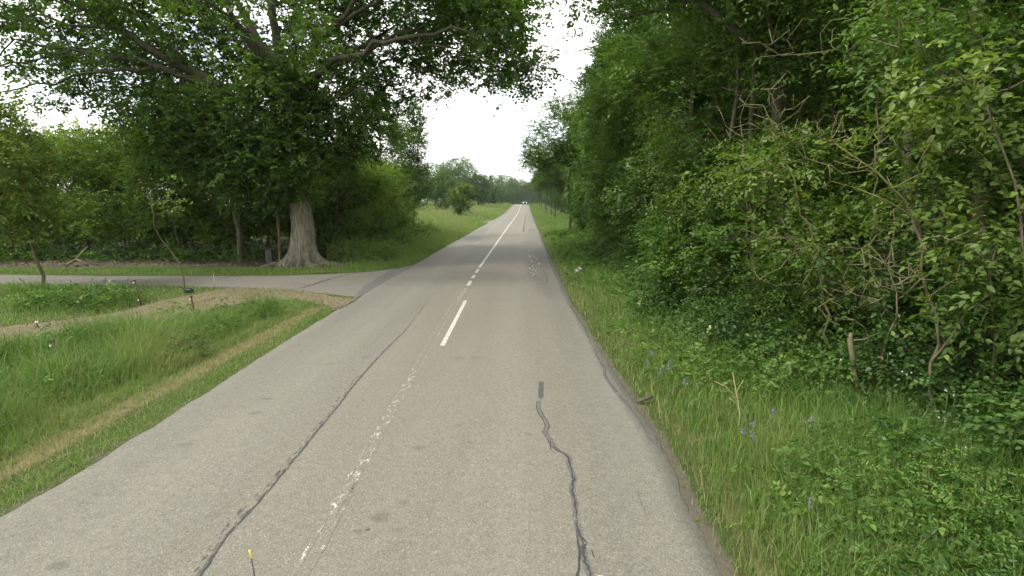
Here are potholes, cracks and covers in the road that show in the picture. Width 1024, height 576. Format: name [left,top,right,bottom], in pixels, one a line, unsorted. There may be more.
crack [194,303,426,576]
